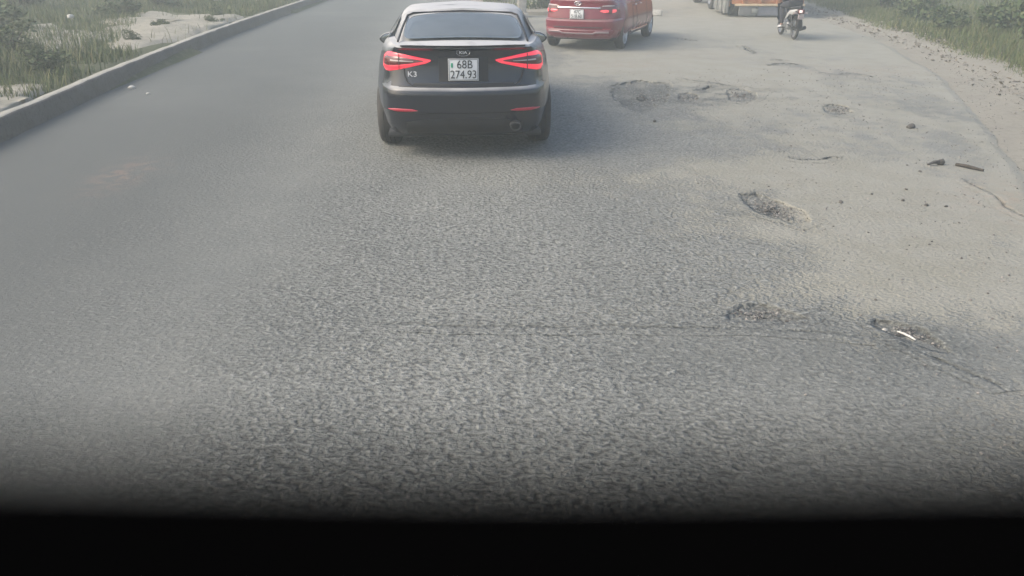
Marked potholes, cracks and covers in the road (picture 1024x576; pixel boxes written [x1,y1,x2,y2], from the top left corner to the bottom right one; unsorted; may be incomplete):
pothole [730,189,823,230]
pothole [710,296,826,330]
pothole [673,91,706,104]
crack [954,178,1024,221]
crack [676,45,873,92]
pothole [720,88,764,105]
crack [781,155,843,163]
pothole [816,103,861,117]
crack [378,317,1024,394]
pothole [604,79,675,114]
pothole [855,312,968,361]
